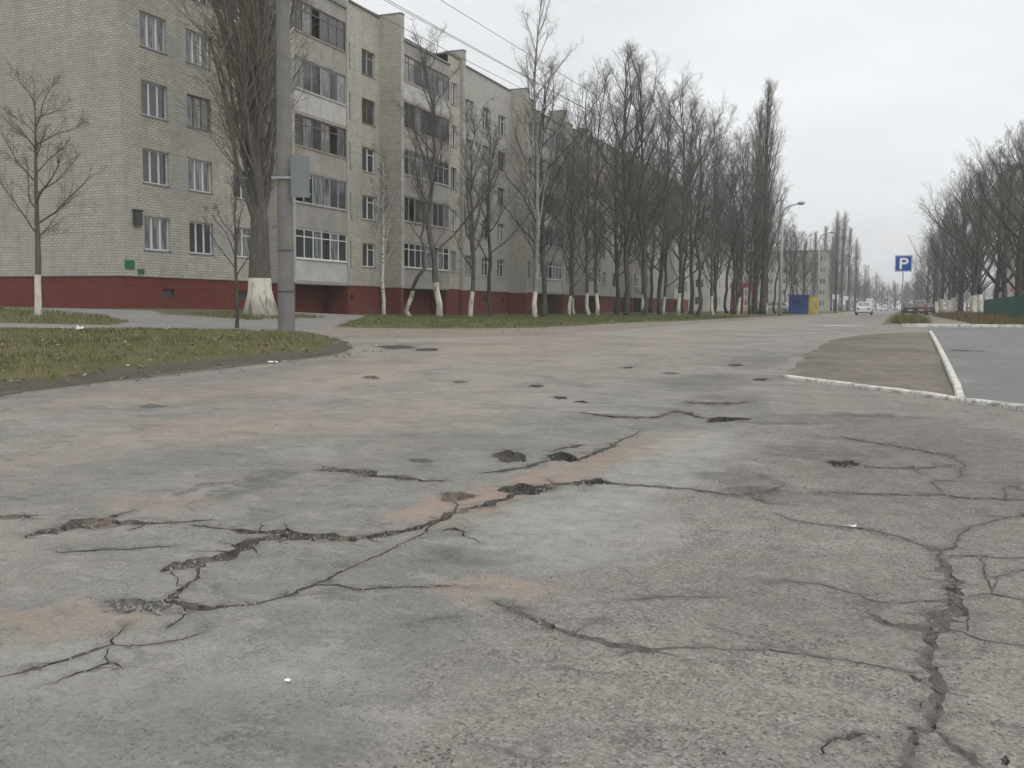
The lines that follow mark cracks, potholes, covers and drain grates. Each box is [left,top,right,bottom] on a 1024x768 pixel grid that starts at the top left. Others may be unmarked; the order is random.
pothole [497,483,554,495]
pothole [547,452,578,462]
crack [0,401,750,685]
pothole [492,450,526,463]
pothole [826,460,859,468]
crack [490,436,1024,768]
pothole [439,492,476,504]
